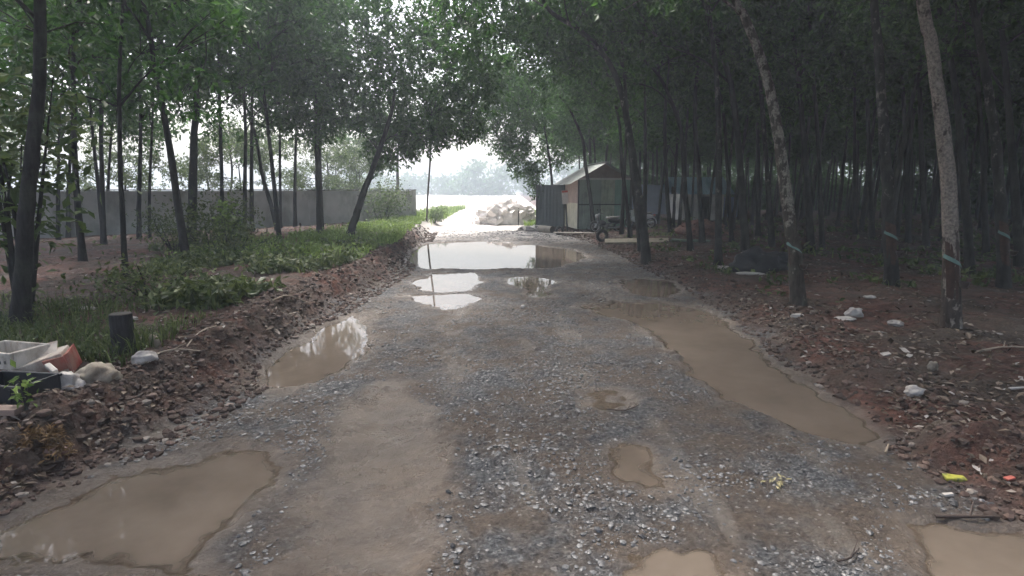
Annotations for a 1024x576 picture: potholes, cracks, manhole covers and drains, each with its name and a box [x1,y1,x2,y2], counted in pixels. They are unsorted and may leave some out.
pothole [878,503,1024,576]
pothole [406,272,487,294]
pothole [612,277,689,298]
pothole [0,436,306,576]
pothole [248,312,382,391]
pothole [403,241,590,270]
pothole [499,275,560,298]
pothole [595,439,682,496]
pothole [395,293,486,311]
pothole [603,537,748,576]
pothole [569,299,900,455]
